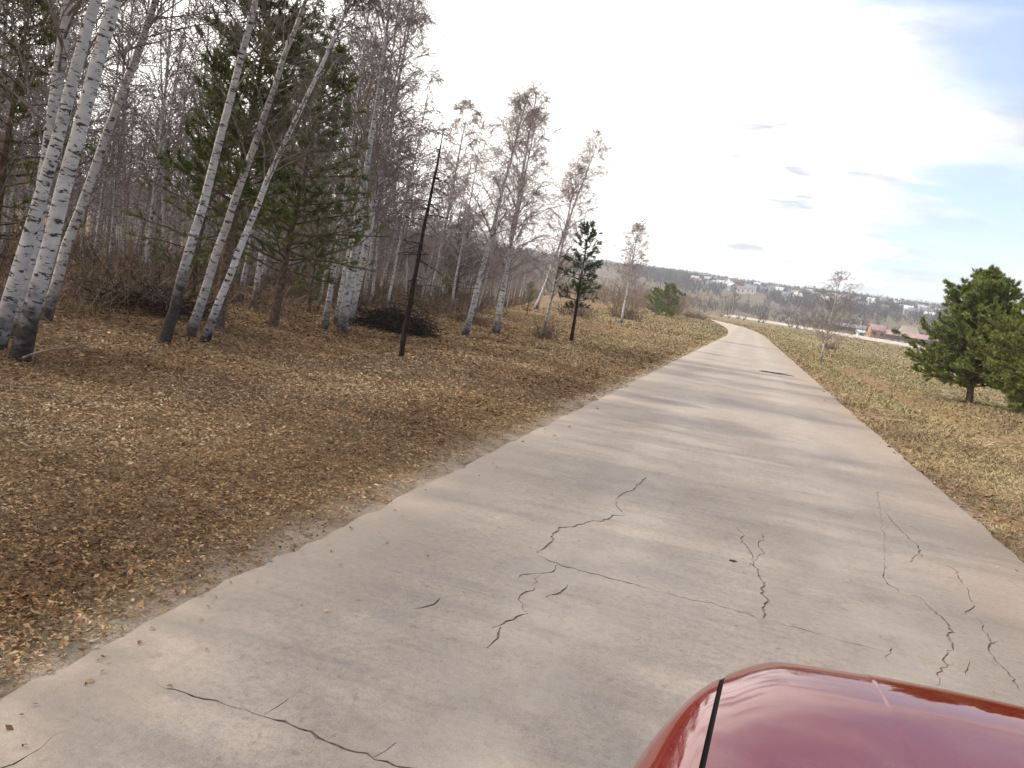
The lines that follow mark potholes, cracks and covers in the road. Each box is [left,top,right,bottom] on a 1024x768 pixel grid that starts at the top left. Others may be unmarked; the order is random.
crack [487,478,874,649]
crack [159,685,411,768]
crack [877,492,1020,691]
